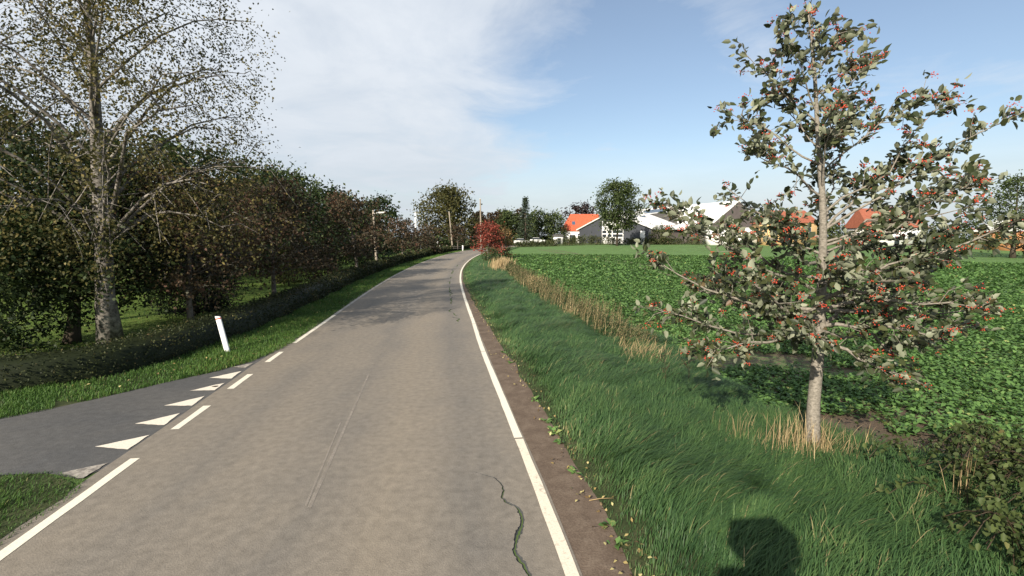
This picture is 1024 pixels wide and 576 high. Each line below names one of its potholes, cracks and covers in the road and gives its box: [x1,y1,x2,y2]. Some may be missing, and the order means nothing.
crack [472,471,532,576]
